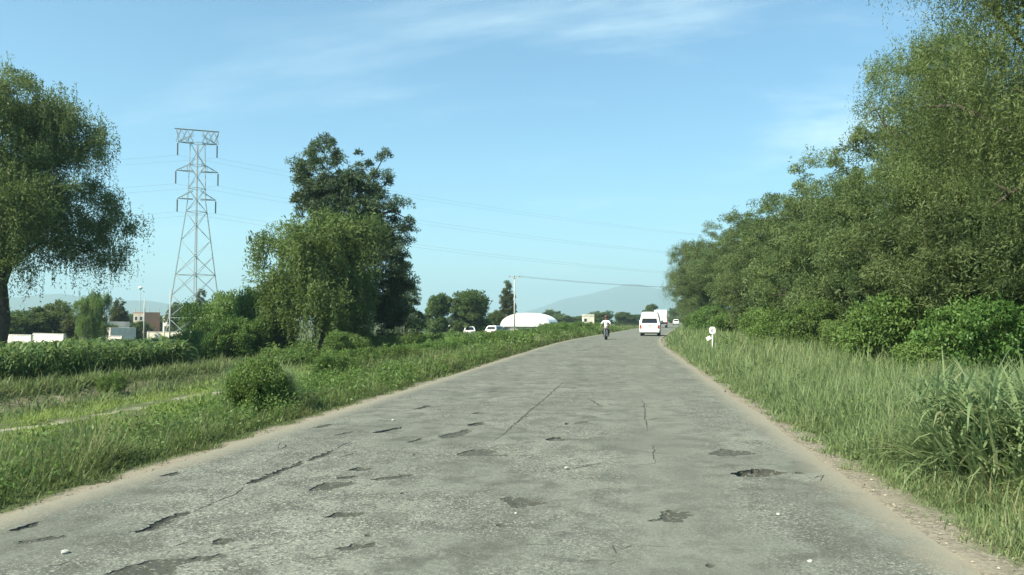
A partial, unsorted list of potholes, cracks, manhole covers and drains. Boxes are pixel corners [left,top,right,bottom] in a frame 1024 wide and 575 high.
crack [628,400,726,465]
pothole [439,429,472,439]
pothole [730,468,788,477]
pothole [309,481,356,491]
pothole [708,448,755,457]
pothole [649,510,694,523]
pothole [501,497,548,508]
pothole [246,461,304,484]
pothole [134,512,192,533]
pothole [104,553,227,575]
